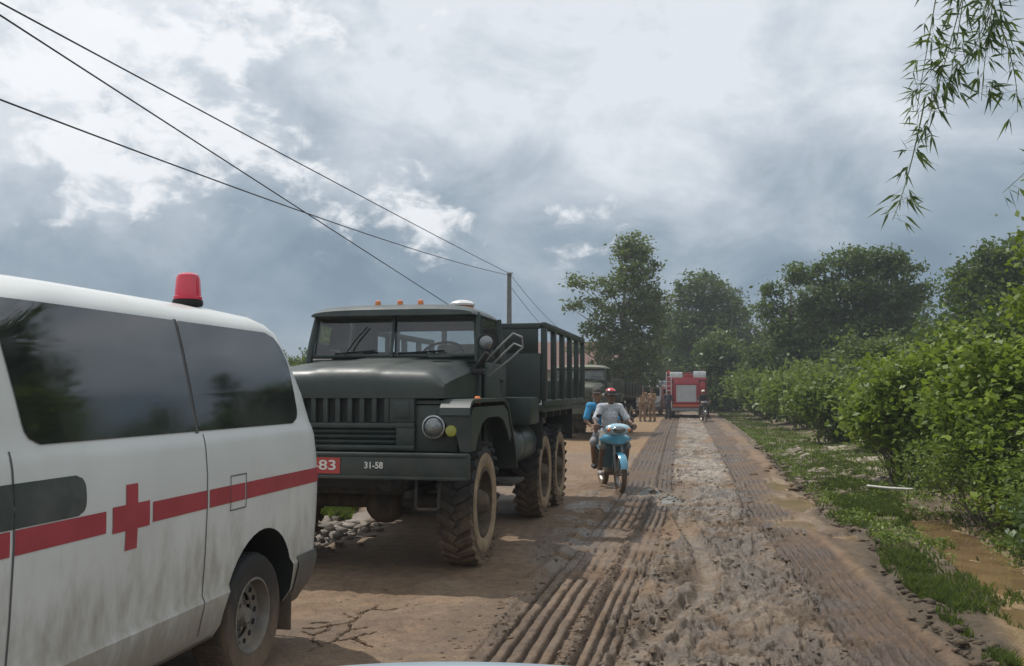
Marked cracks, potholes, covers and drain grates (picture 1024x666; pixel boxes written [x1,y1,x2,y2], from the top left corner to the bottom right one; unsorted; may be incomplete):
crack [301,604,398,652]
